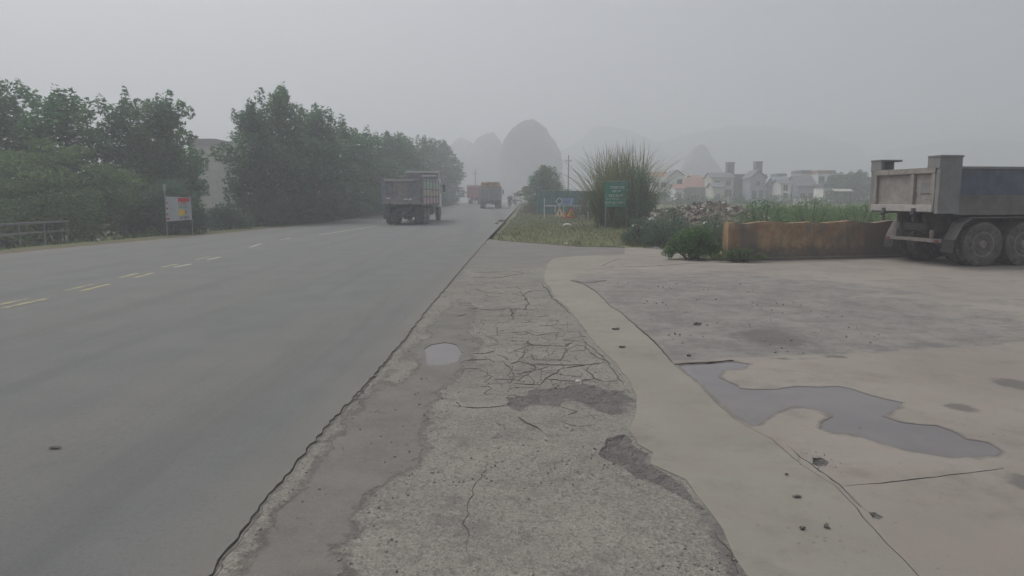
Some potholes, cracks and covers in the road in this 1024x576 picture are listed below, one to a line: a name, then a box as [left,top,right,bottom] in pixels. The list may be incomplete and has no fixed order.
crack [214,240,624,575]
